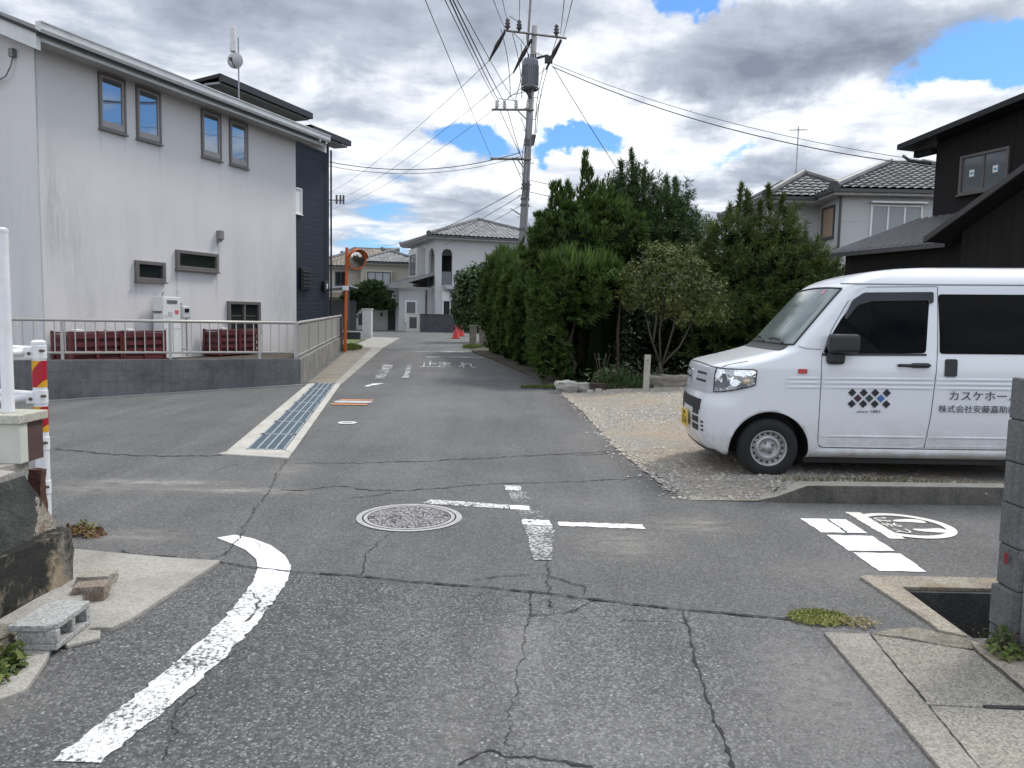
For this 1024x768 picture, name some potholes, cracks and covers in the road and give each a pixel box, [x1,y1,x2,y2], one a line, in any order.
crack [458,561,594,768]
drain grate [276,410,314,422]
drain grate [287,402,321,411]
drain grate [246,433,297,450]
crack [295,451,607,464]
drain grate [296,394,326,403]
crack [281,477,642,498]
drain grate [263,421,306,434]
crack [626,611,736,768]
manhole cover [356,504,462,532]
